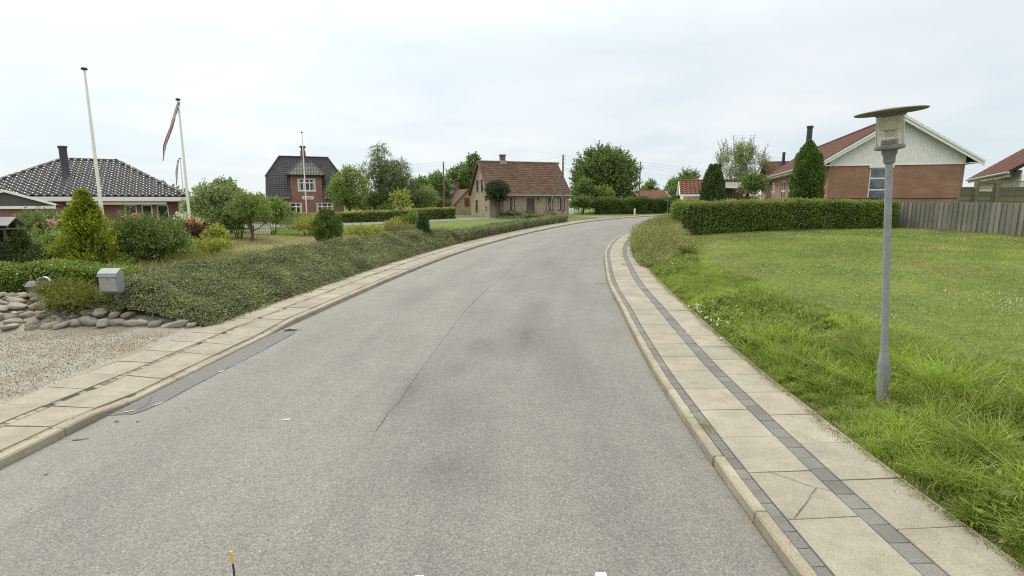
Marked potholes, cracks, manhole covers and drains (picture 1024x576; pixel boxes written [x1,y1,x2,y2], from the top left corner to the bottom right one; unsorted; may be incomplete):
crack [371,245,545,442]
